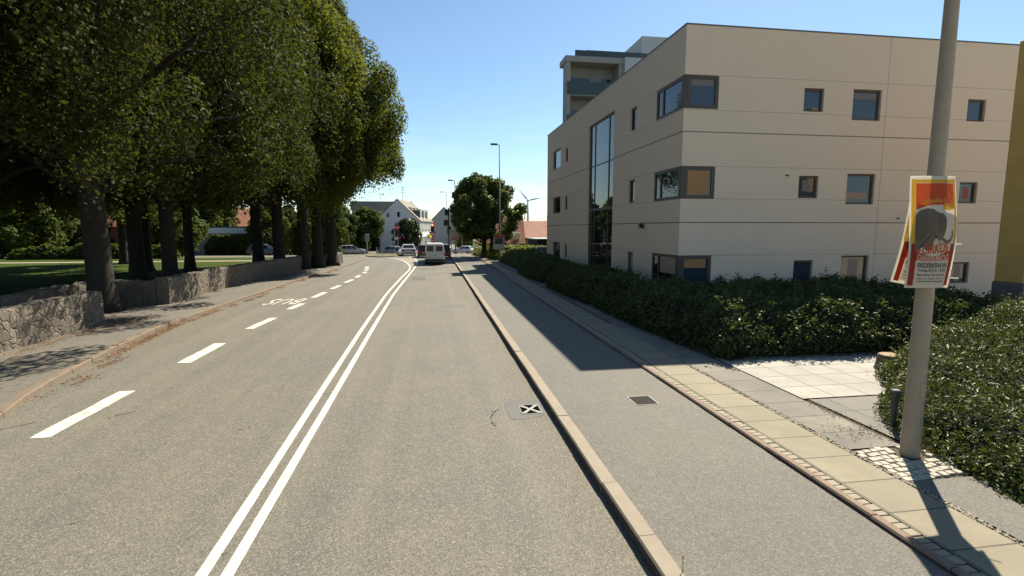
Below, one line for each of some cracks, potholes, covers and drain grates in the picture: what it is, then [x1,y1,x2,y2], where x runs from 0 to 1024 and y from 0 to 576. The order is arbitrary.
drain grate [517,404,544,415]
